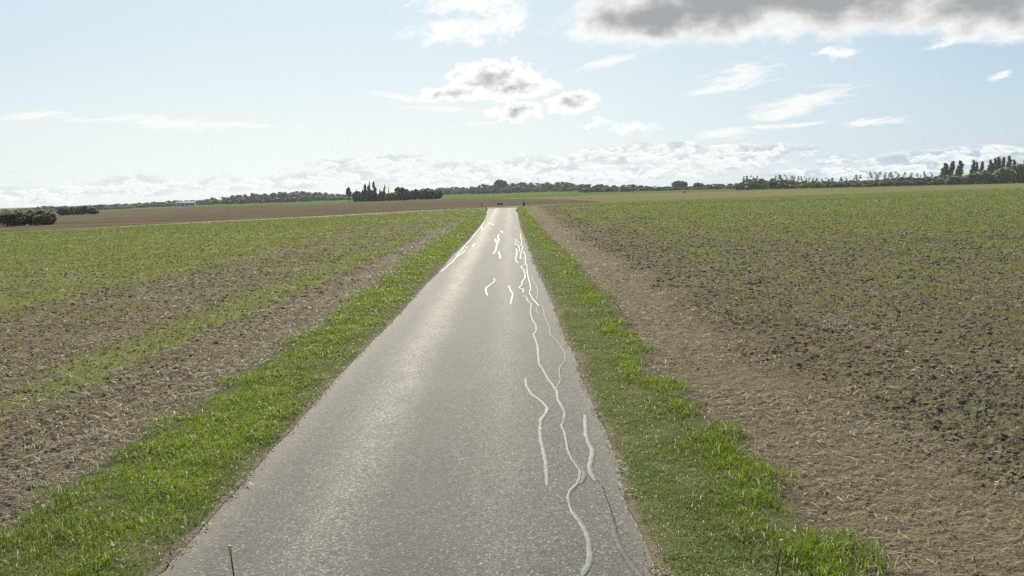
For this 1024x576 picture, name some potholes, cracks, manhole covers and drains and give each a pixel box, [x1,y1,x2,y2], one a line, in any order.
crack [602,485,644,576]
